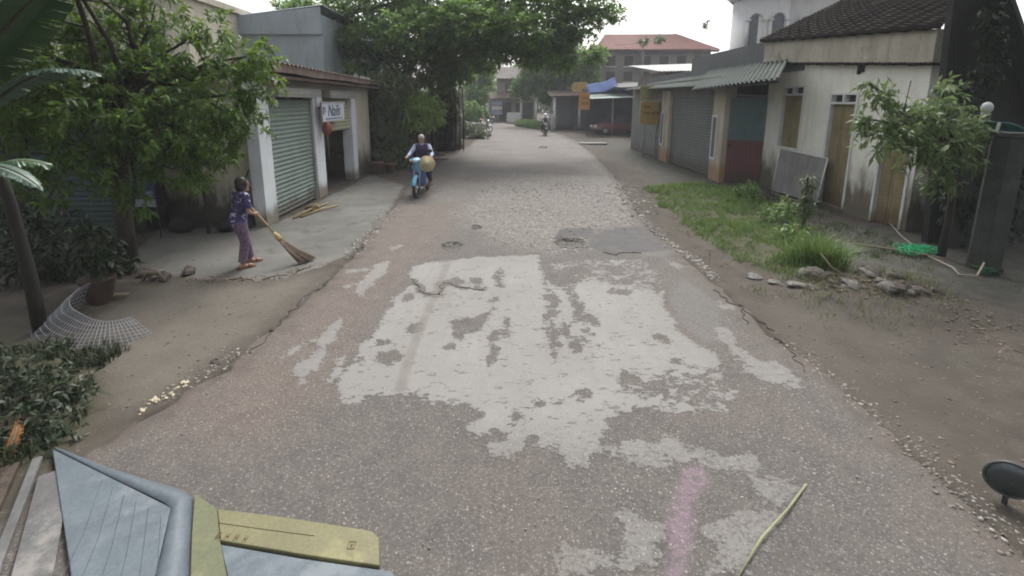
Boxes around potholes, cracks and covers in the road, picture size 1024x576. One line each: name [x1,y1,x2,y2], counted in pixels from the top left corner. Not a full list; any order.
crack [412,279,484,295]
pothole [553,237,589,249]
crack [554,237,641,256]
crack [713,290,805,373]
pothole [441,241,465,251]
crack [248,279,329,354]
